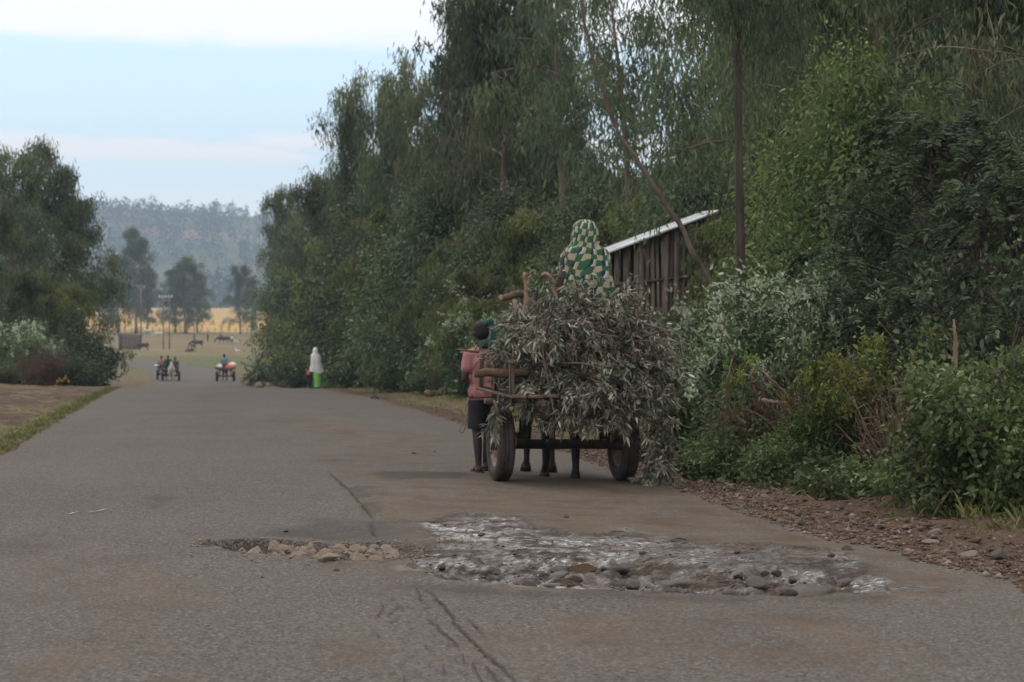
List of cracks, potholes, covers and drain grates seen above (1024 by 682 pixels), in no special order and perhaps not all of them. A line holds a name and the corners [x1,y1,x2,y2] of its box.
pothole [160,536,430,566]
crack [373,587,516,682]
pothole [367,511,926,603]
